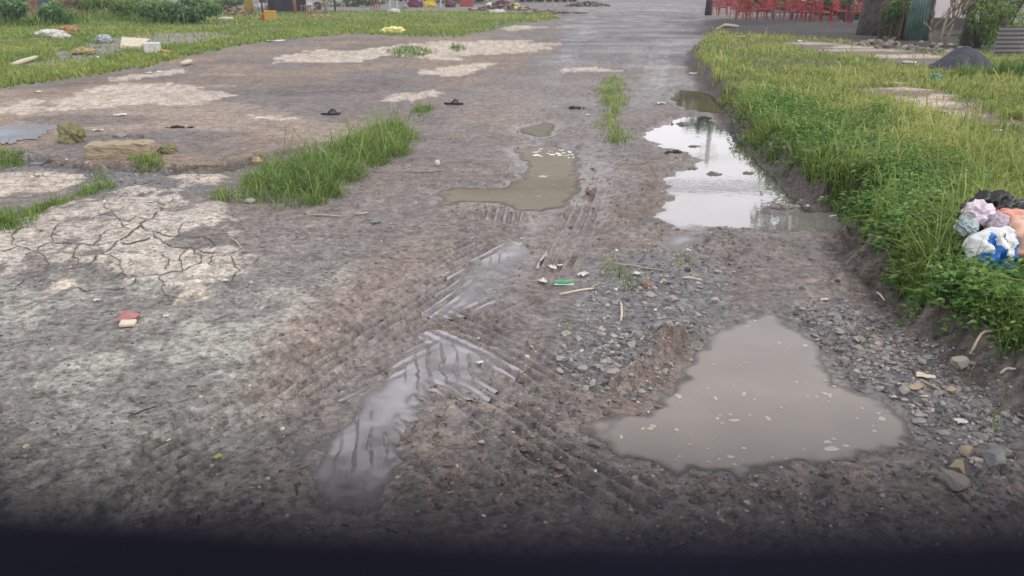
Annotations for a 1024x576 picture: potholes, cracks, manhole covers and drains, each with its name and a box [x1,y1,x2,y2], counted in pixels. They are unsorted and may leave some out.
pothole [634,111,851,233]
pothole [421,142,596,217]
crack [1,199,250,299]
pothole [559,303,948,478]
